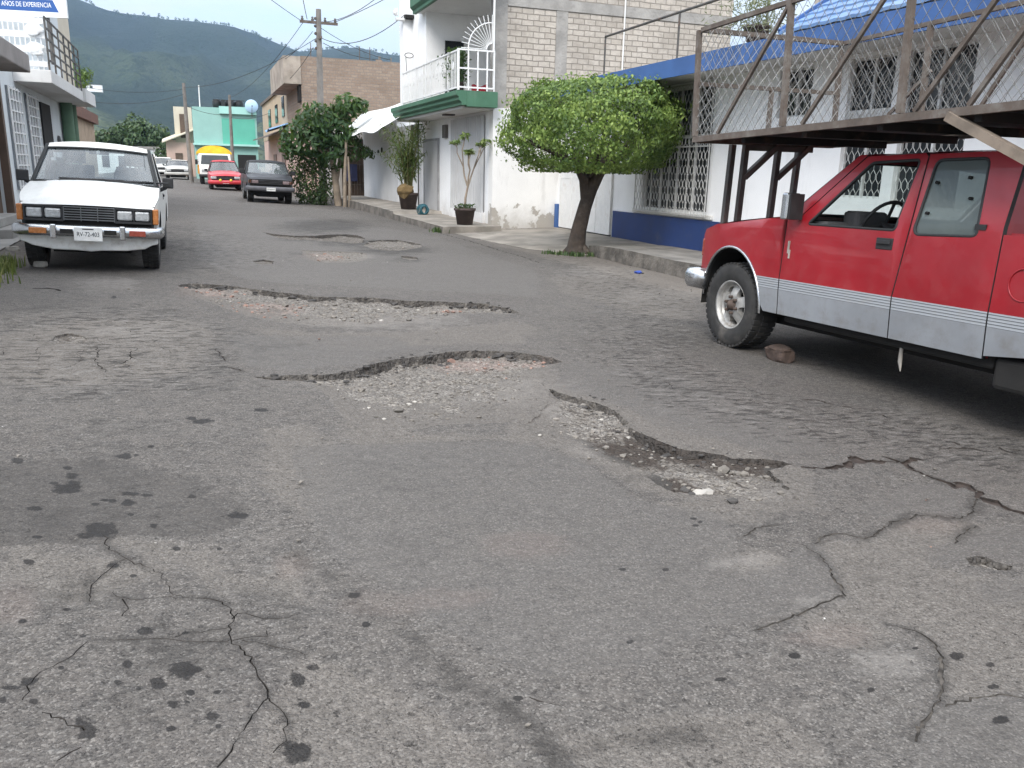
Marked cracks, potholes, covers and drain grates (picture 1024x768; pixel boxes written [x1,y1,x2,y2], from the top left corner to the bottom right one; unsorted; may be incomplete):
pothole [177,282,518,327]
pothole [527,389,799,506]
pothole [265,233,365,244]
crack [887,625,1023,742]
pothole [256,348,563,430]
crack [754,441,1024,631]
crack [2,331,171,372]
pothole [364,240,422,251]
crack [22,536,305,768]
